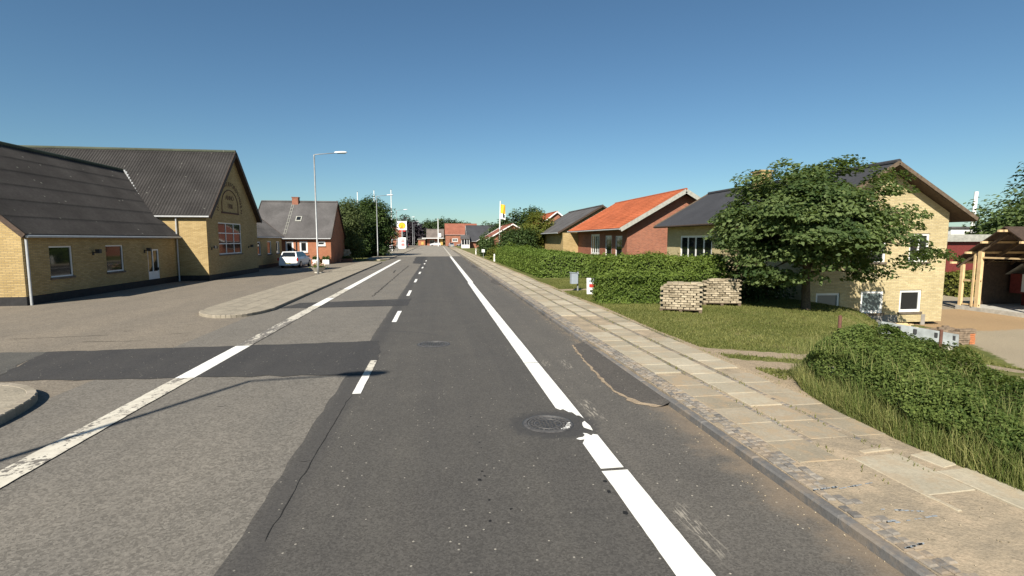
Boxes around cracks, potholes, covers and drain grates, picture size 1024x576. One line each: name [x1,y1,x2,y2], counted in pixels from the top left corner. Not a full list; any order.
manhole cover [522,415,574,434]
